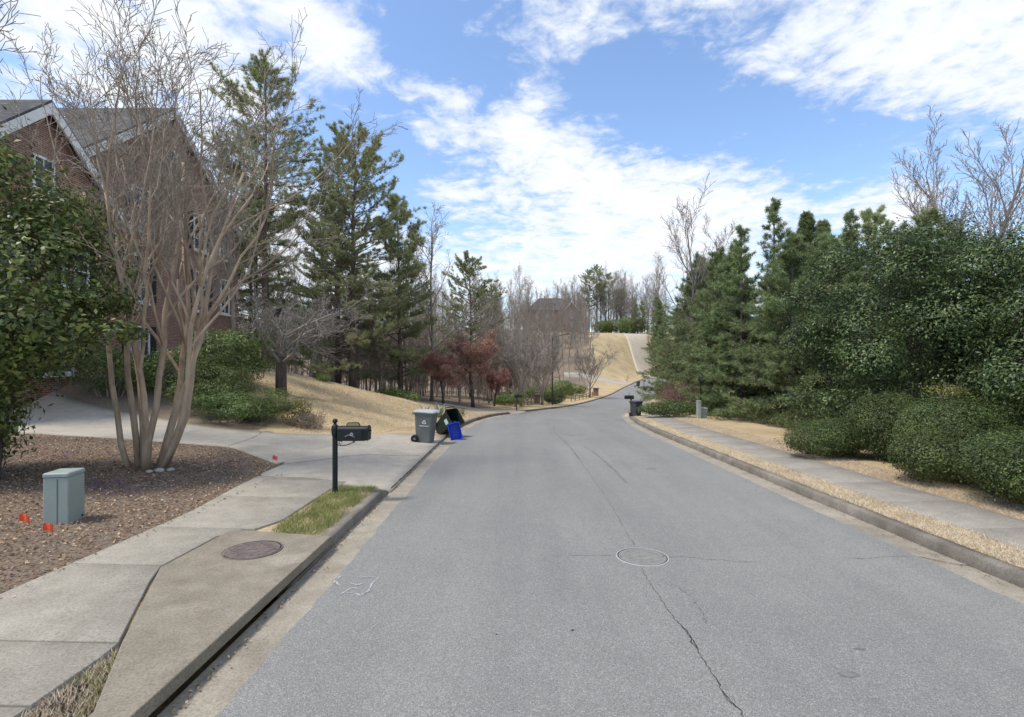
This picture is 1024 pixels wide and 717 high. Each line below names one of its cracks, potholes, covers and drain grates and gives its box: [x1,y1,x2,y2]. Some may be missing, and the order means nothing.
manhole cover [221,540,283,560]
crack [553,425,627,483]
manhole cover [616,548,669,567]
crack [641,568,743,716]
